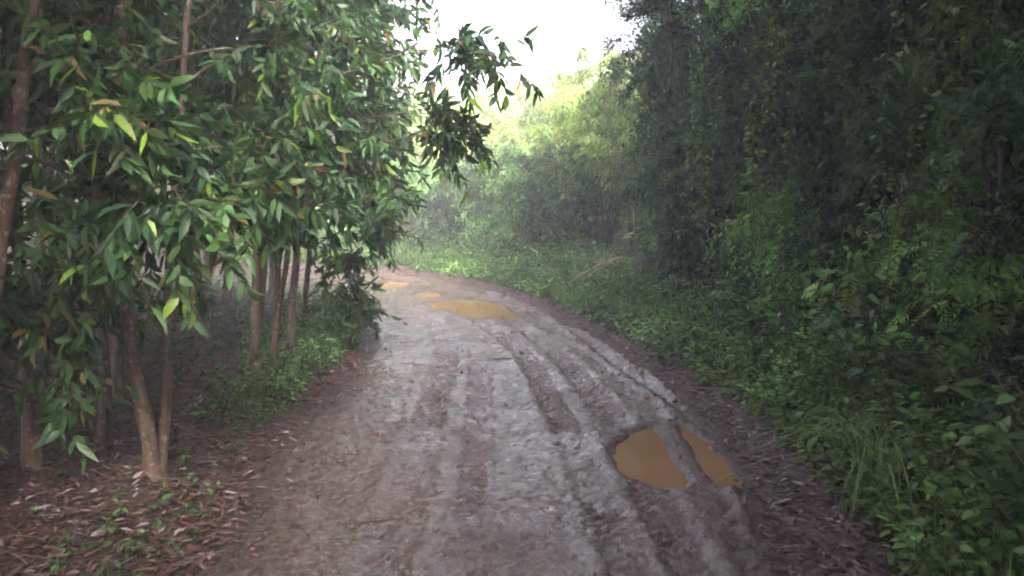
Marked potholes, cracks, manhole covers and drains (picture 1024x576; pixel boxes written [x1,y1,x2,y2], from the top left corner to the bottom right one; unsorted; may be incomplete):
pothole [408,290,447,298]
pothole [669,419,742,489]
pothole [602,421,699,492]
pothole [375,280,412,289]
pothole [421,299,527,321]
